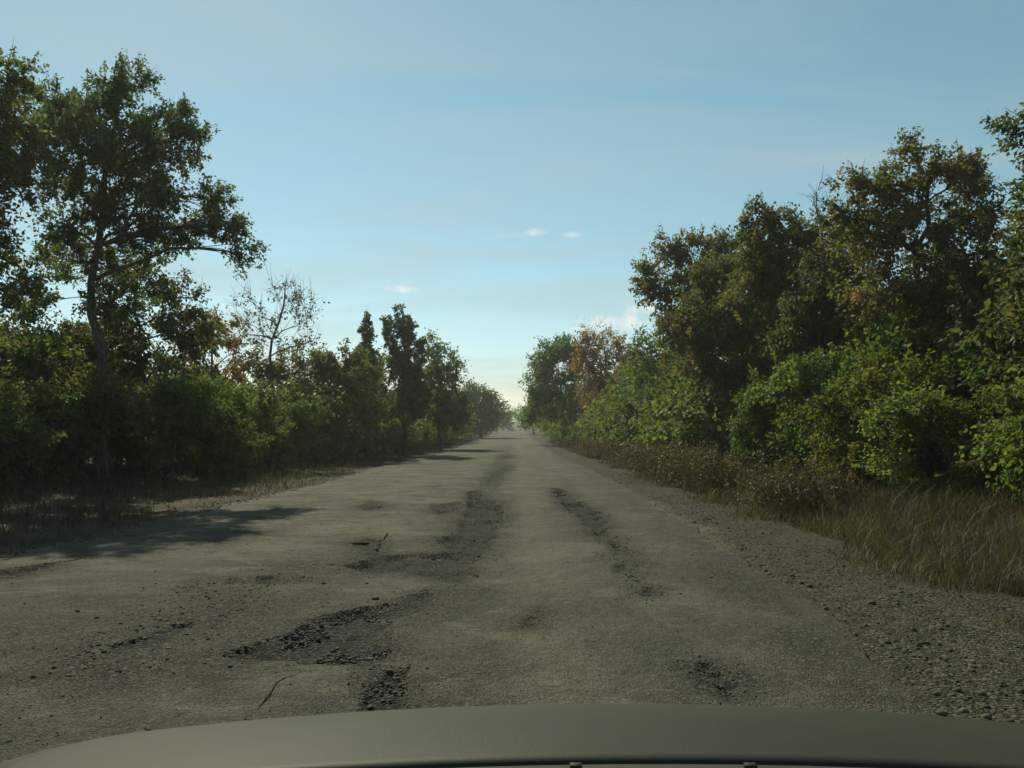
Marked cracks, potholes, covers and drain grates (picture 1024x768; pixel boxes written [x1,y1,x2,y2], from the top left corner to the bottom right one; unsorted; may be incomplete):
crack [257,670,306,710]
pothole [356,667,415,712]
pothole [639,586,658,597]
pothole [79,619,197,670]
pothole [687,661,744,699]
pothole [604,537,627,554]
pothole [517,608,545,629]
pothole [611,561,632,573]
pothole [218,589,438,666]
pothole [551,488,614,536]
pothole [342,490,508,584]
